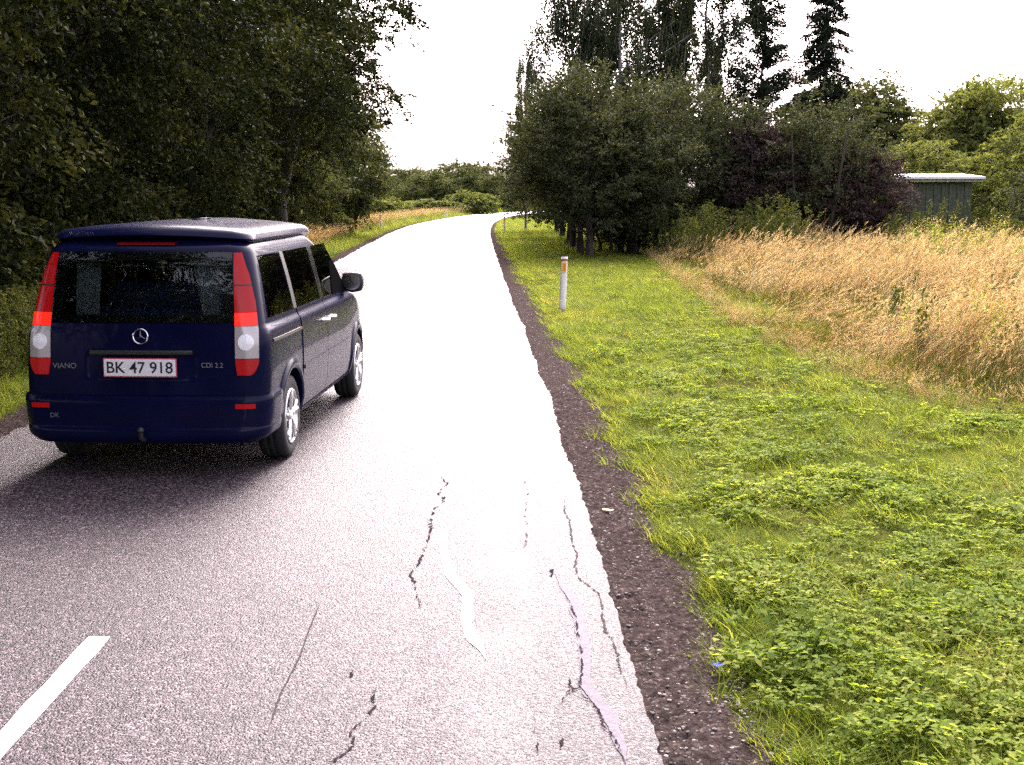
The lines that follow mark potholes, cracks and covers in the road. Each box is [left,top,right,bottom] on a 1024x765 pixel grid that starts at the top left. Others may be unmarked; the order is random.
crack [409,475,448,609]
crack [563,498,630,695]
crack [327,671,377,763]
